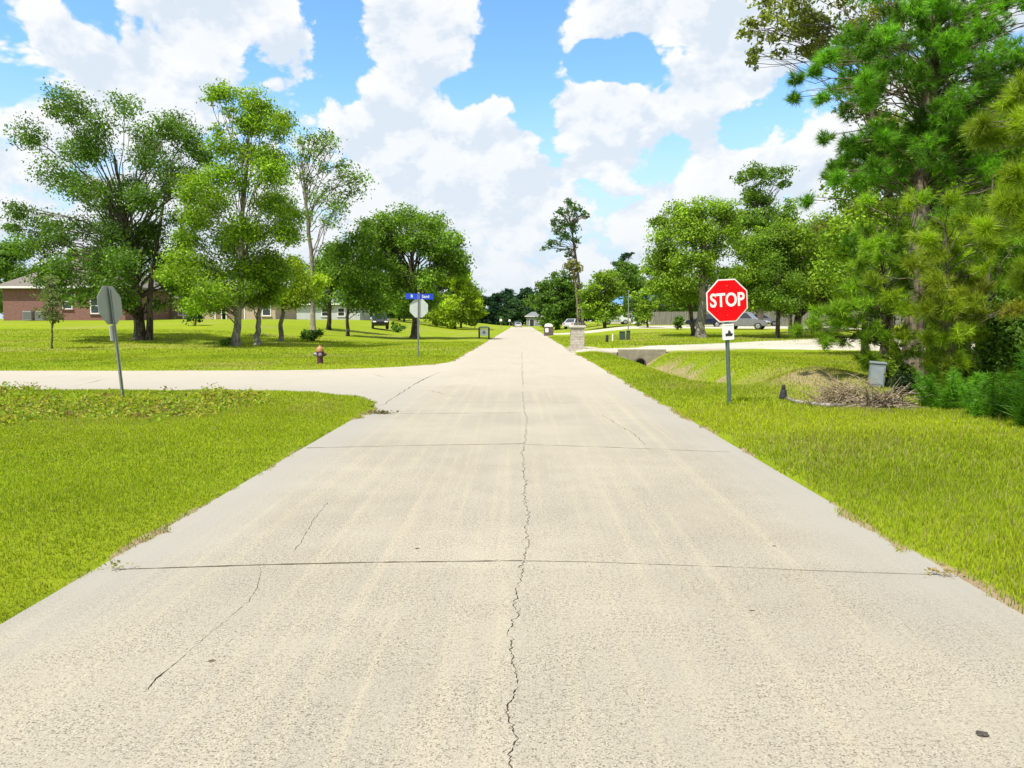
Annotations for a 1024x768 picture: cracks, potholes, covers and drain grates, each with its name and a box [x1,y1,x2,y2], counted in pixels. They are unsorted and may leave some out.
crack [505,392,531,768]
crack [148,568,261,690]
